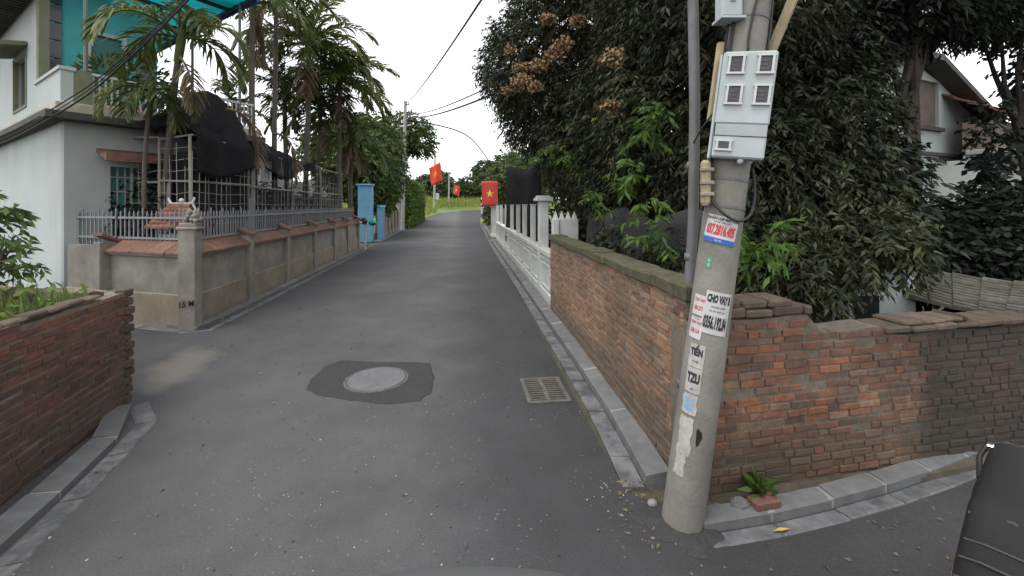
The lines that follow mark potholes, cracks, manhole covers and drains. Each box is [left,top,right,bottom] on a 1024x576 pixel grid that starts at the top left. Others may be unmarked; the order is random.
drain grate [520,376,572,404]
manhole cover [343,367,409,393]
